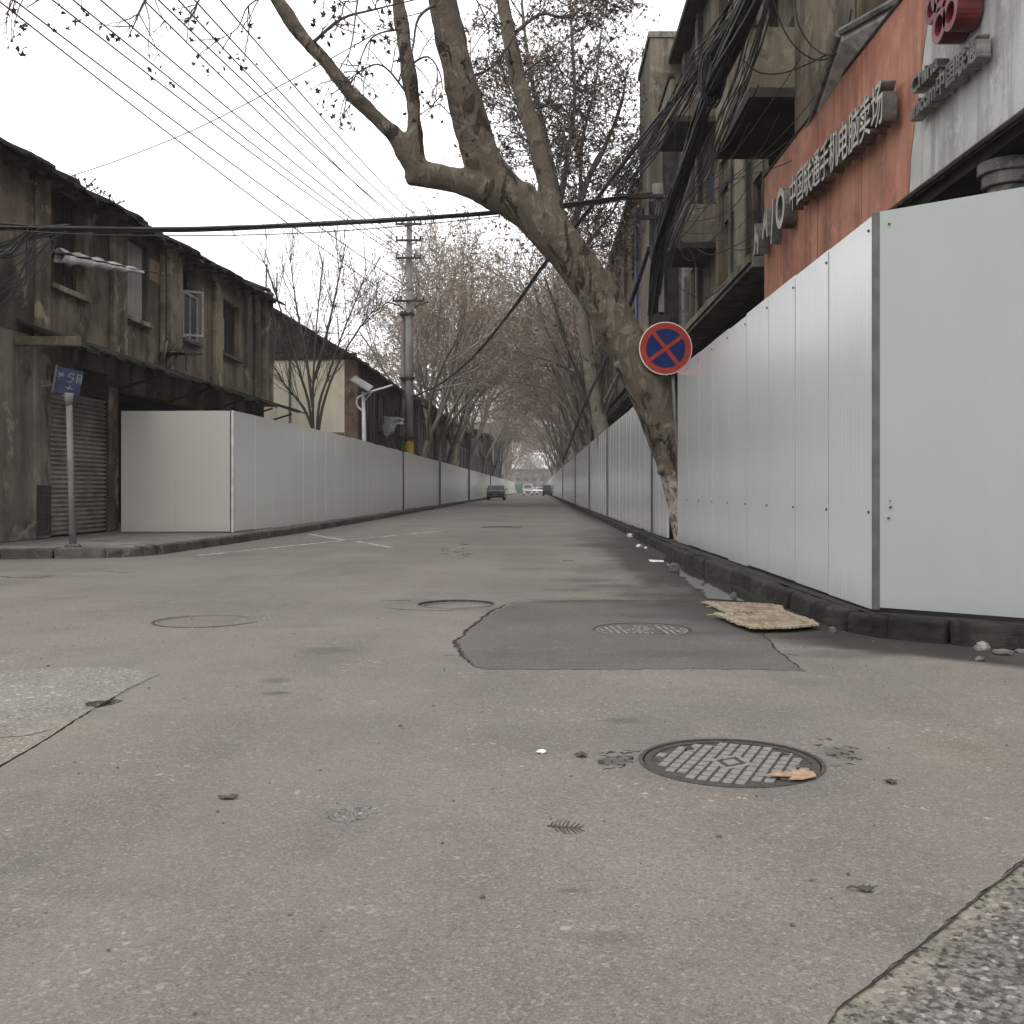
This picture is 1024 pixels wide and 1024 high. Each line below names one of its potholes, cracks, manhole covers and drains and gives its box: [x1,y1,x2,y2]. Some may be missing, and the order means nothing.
manhole cover [639,738,827,788]
manhole cover [151,614,259,628]
manhole cover [592,623,693,637]
pothole [85,699,123,708]
crack [763,634,806,671]
manhole cover [417,599,495,608]
